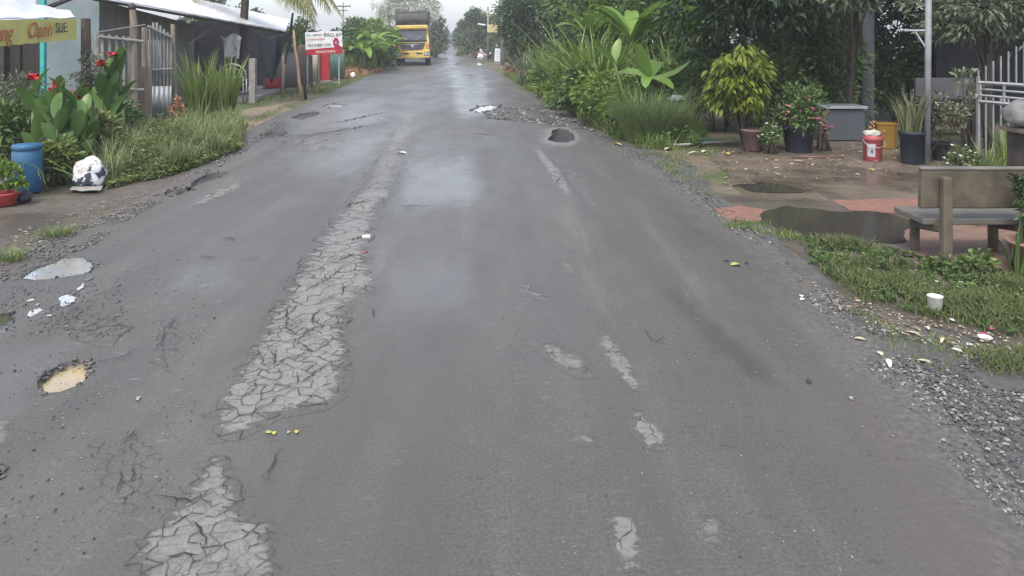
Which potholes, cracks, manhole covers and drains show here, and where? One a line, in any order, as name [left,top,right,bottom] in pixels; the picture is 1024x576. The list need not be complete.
pothole [185,170,228,190]
pothole [163,184,196,196]
pothole [548,128,577,142]
crack [91,112,418,576]
pothole [291,110,320,119]
pothole [469,104,502,113]
pothole [0,309,16,334]
pothole [37,357,96,395]
pothole [13,256,100,280]
